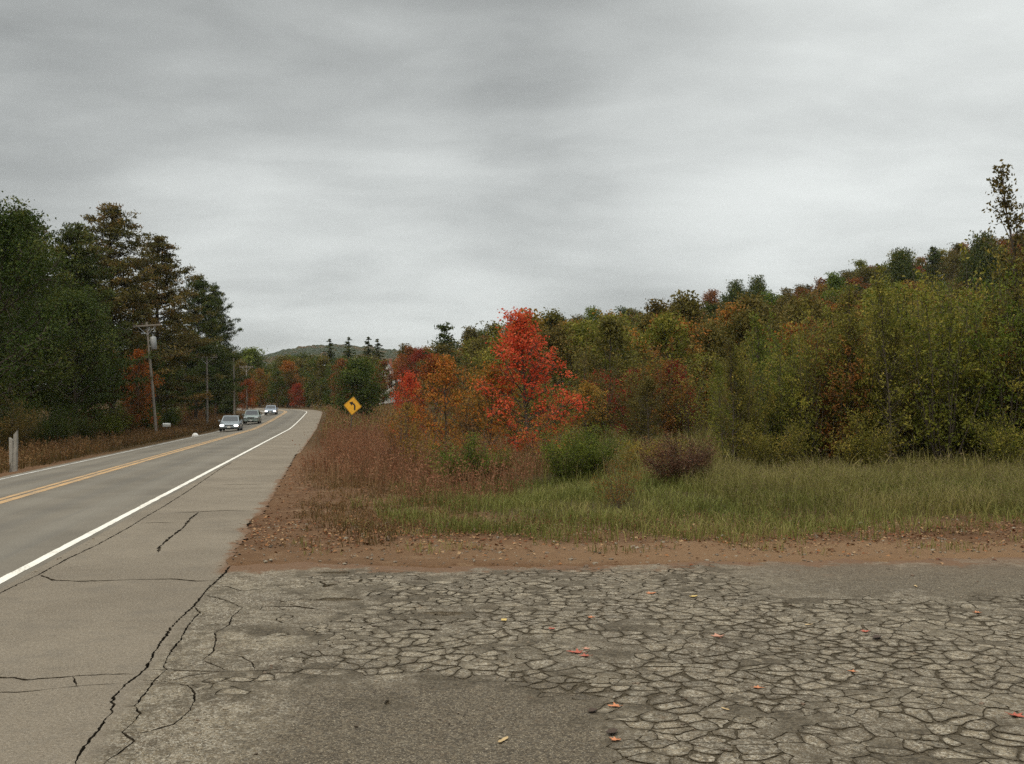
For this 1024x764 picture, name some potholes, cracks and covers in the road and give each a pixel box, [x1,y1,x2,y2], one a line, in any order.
crack [192,564,1024,764]
crack [0,462,293,764]
